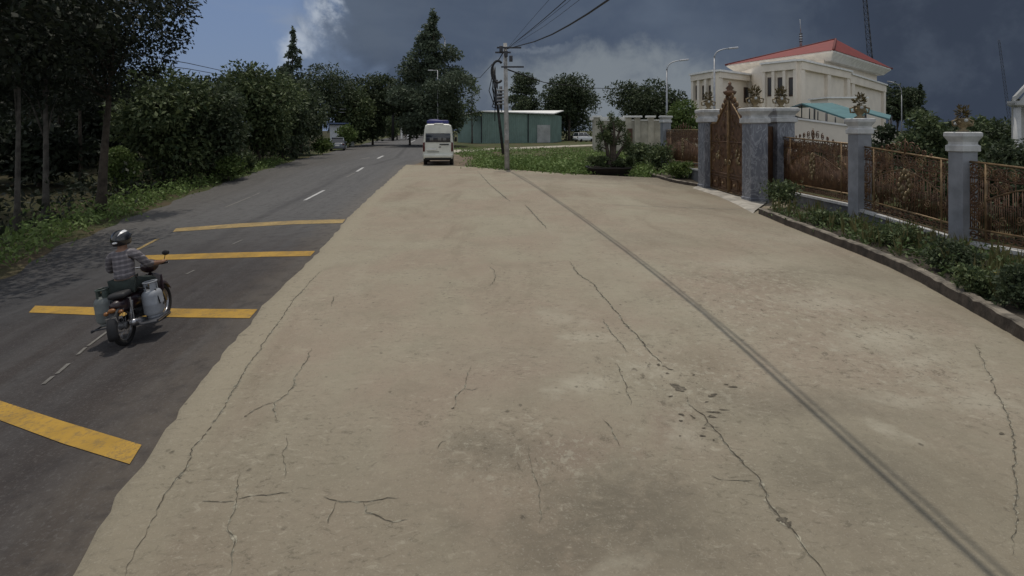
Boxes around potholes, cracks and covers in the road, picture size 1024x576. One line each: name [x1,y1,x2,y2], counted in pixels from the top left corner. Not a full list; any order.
crack [570,262,825,574]
crack [975,344,1020,553]
crack [325,497,407,522]
crack [126,275,317,574]
crack [528,445,542,523]
crack [451,368,477,409]
